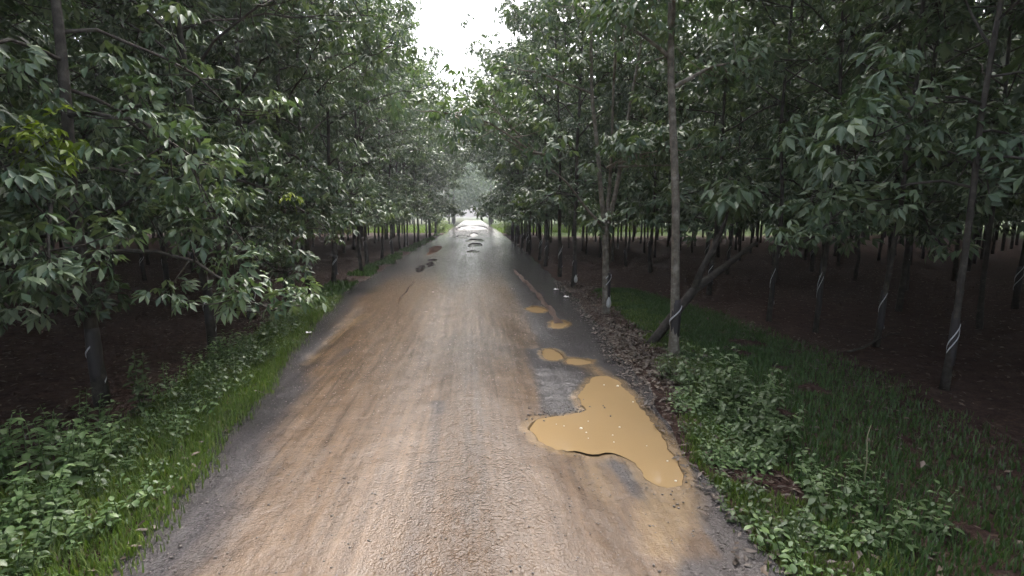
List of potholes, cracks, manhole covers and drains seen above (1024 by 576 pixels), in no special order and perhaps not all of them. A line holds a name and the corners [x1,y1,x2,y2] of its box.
pothole [528,376,684,488]
pothole [550,320,570,329]
pothole [542,348,564,361]
